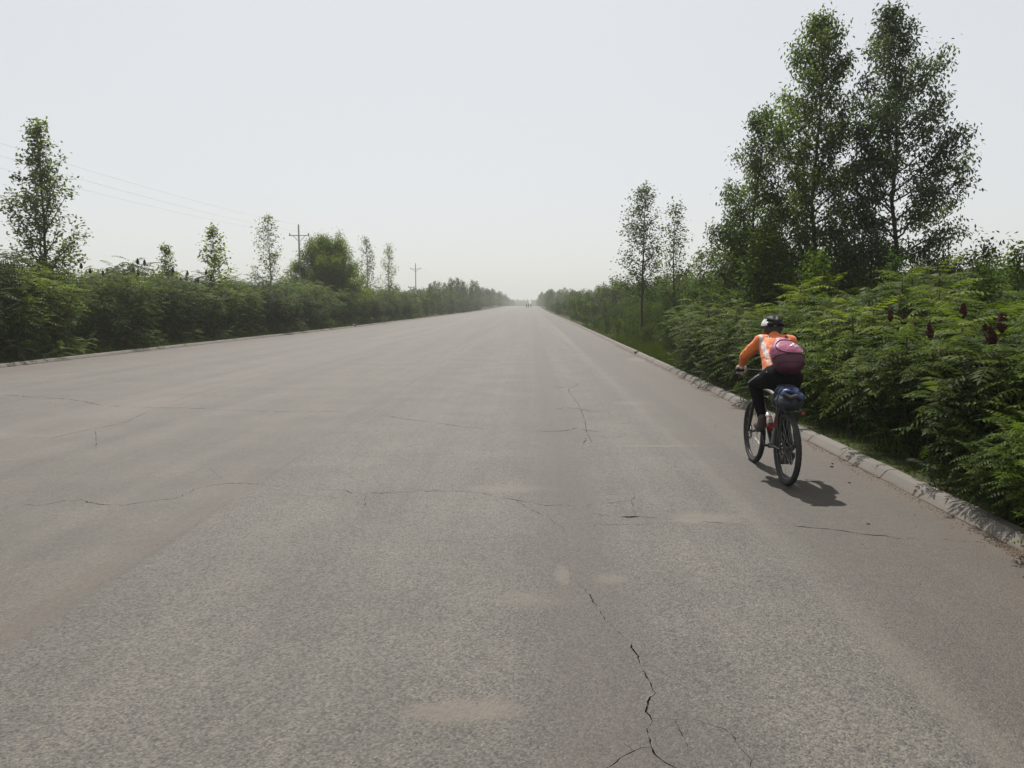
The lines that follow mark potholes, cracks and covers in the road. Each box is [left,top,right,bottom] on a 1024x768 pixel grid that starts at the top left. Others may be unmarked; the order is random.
crack [544,381,598,442]
crack [345,490,570,533]
crack [38,471,290,506]
crack [704,521,984,543]
crack [588,488,678,537]
crack [5,389,332,449]
crack [571,577,751,768]
